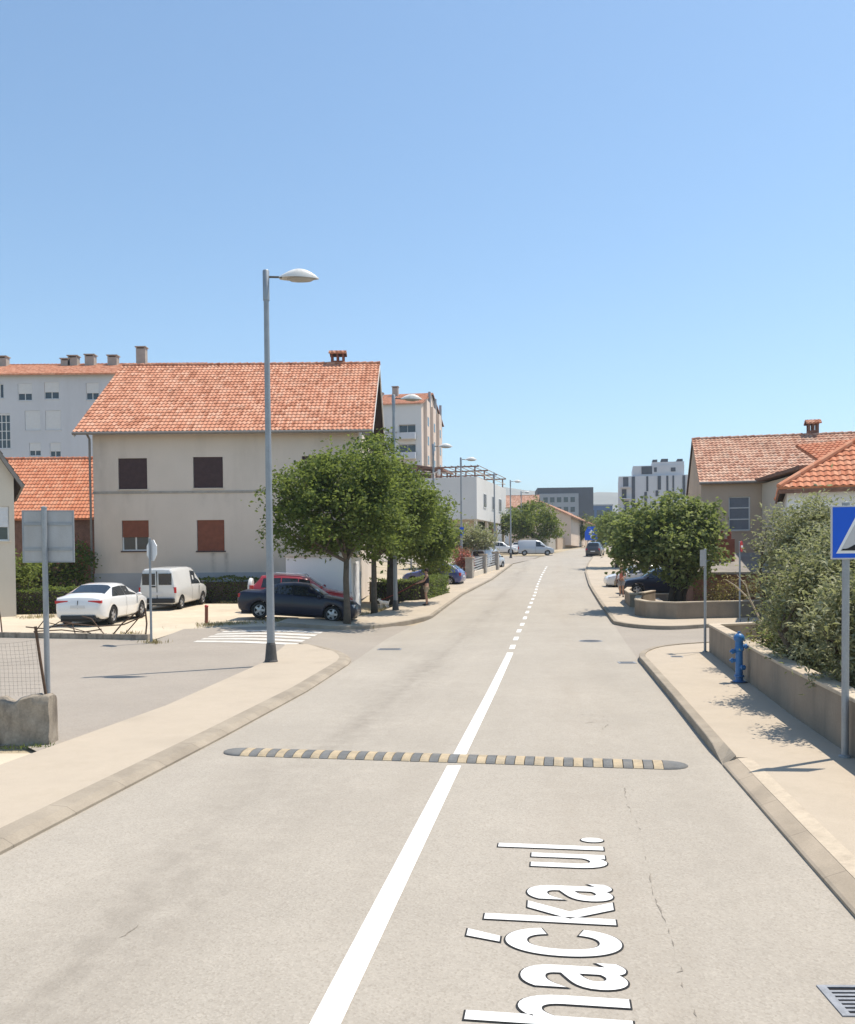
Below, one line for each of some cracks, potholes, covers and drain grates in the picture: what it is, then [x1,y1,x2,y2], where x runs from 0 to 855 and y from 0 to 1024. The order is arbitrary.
crack [624,788,697,1022]
drain grate [816,985,855,1017]
